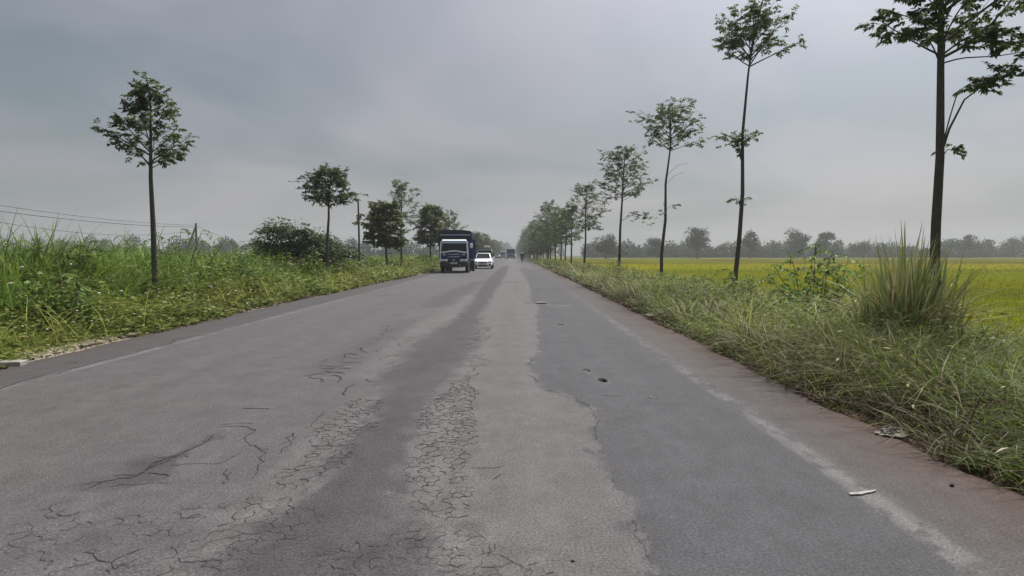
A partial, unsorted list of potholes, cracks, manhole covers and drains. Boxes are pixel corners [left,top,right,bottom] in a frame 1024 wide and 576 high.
crack [1,497,327,576]
crack [315,329,551,576]
pothole [591,376,614,384]
crack [83,423,267,490]
